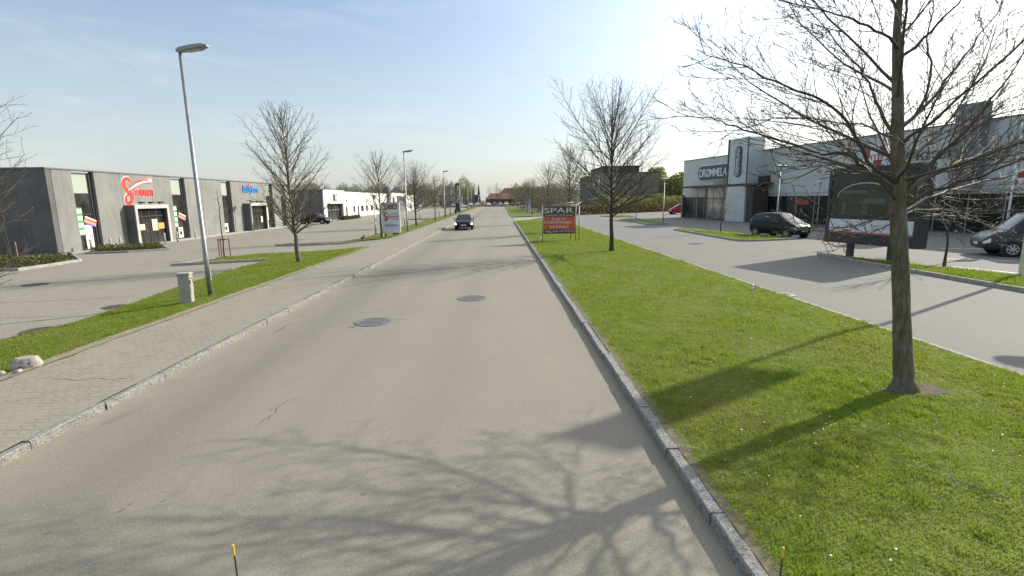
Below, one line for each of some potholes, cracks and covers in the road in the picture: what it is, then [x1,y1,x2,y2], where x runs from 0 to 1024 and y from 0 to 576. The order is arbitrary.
manhole cover [354,317,392,327]
